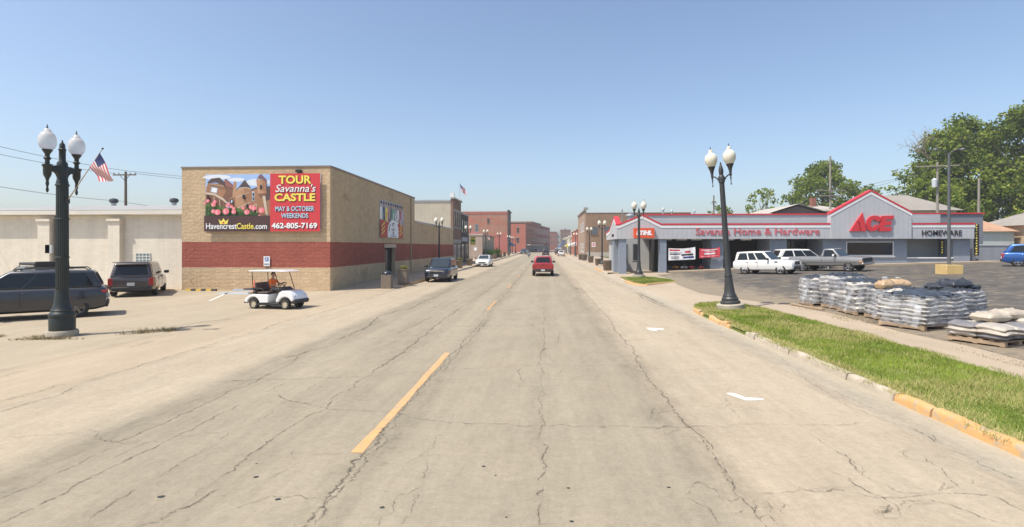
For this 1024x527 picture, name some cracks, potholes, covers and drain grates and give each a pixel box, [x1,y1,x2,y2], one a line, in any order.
crack [13,283,1024,525]
